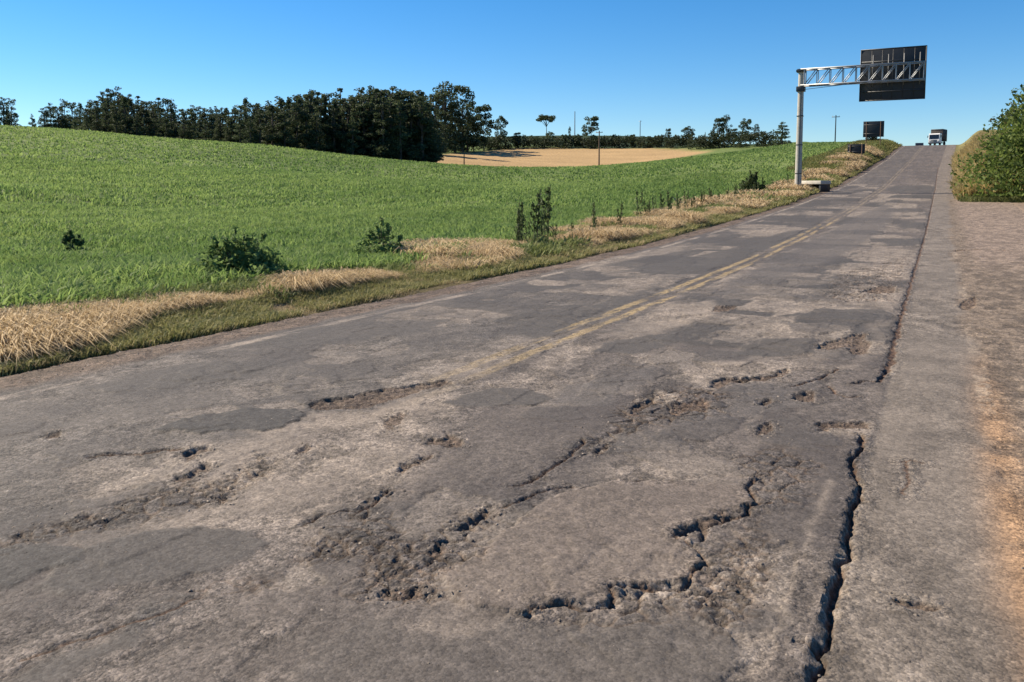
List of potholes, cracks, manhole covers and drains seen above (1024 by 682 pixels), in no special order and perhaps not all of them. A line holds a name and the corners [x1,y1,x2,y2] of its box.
pothole [362,581,395,603]
pothole [786,388,823,405]
pothole [444,504,502,536]
pothole [374,579,441,608]
pothole [662,397,717,418]
pothole [812,332,878,356]
pothole [160,460,221,486]
pothole [301,378,458,413]
pothole [747,419,782,438]
pothole [955,296,981,311]
pothole [622,394,662,416]
